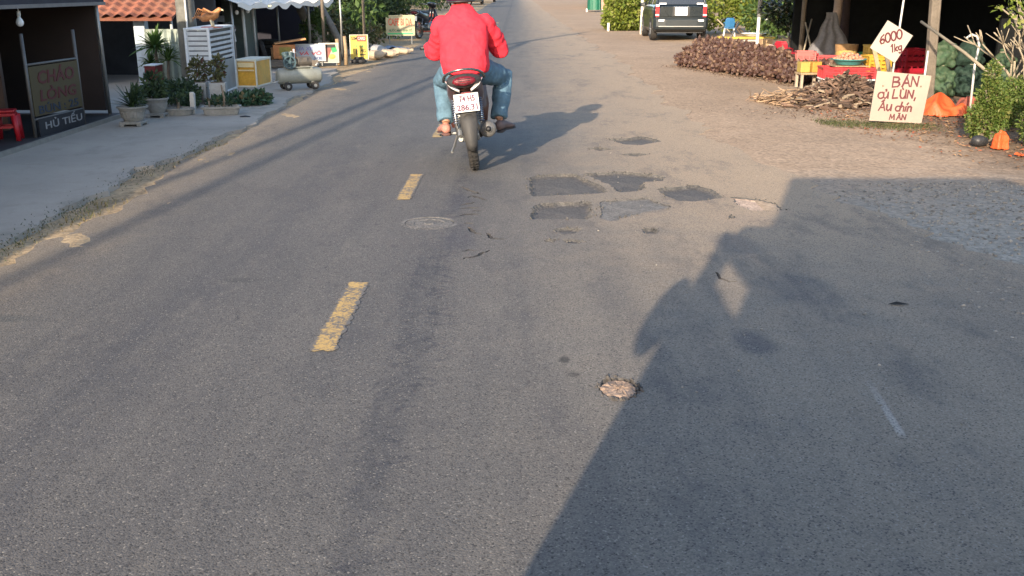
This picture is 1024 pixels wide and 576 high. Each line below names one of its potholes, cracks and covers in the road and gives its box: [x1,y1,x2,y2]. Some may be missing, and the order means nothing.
manhole cover [401,216,458,230]
pothole [606,136,661,145]
pothole [730,197,787,211]
pothole [529,200,594,220]
pothole [583,171,666,192]
pothole [553,225,582,235]
pothole [595,198,672,221]
pothole [526,174,608,197]
crack [459,187,501,259]
pothole [656,184,724,201]
